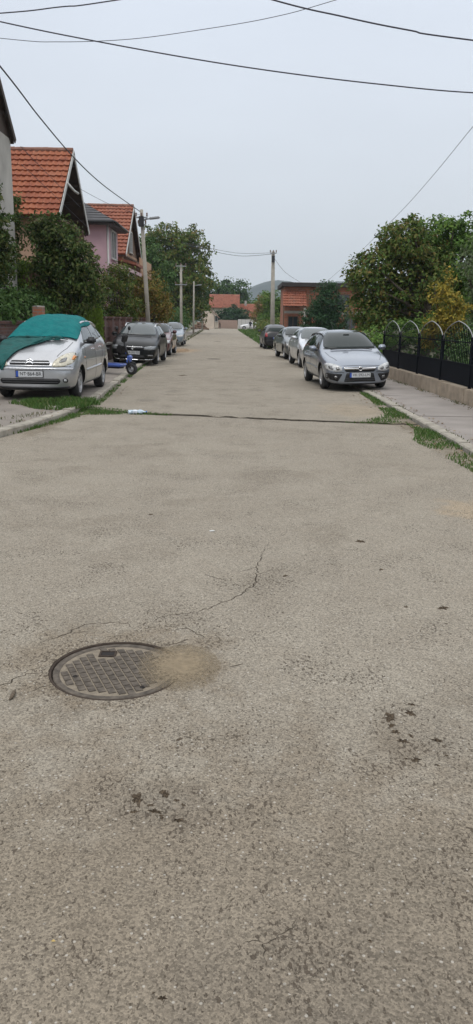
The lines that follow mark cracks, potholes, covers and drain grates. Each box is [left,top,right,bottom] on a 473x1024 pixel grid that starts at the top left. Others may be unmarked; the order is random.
crack [143,544,268,646]
crack [243,917,298,959]
manhole cover [49,642,178,701]
crack [38,622,133,644]
